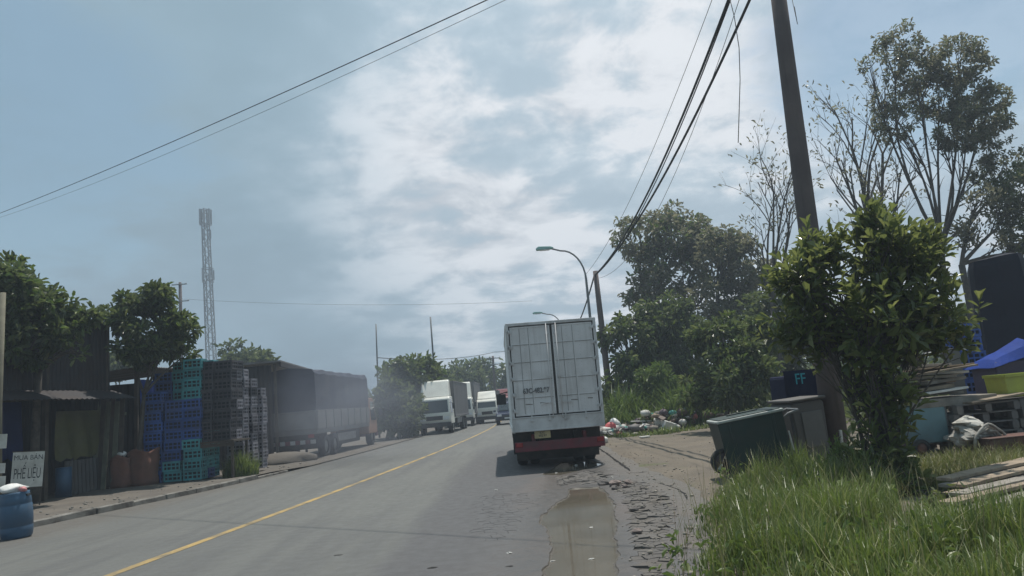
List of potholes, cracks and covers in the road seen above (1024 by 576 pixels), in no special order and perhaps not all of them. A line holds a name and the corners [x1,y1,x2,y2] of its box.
crack [468,492,533,541]
crack [555,448,688,576]
pothole [539,487,621,576]
